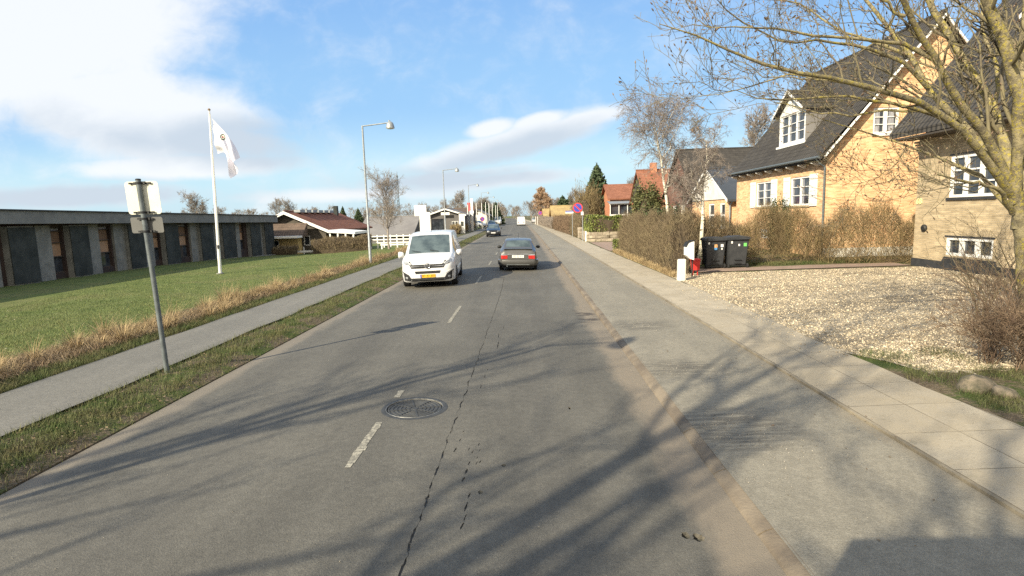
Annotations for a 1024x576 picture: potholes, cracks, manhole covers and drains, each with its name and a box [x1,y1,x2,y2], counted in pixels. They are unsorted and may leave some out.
manhole cover [381,397,448,420]
